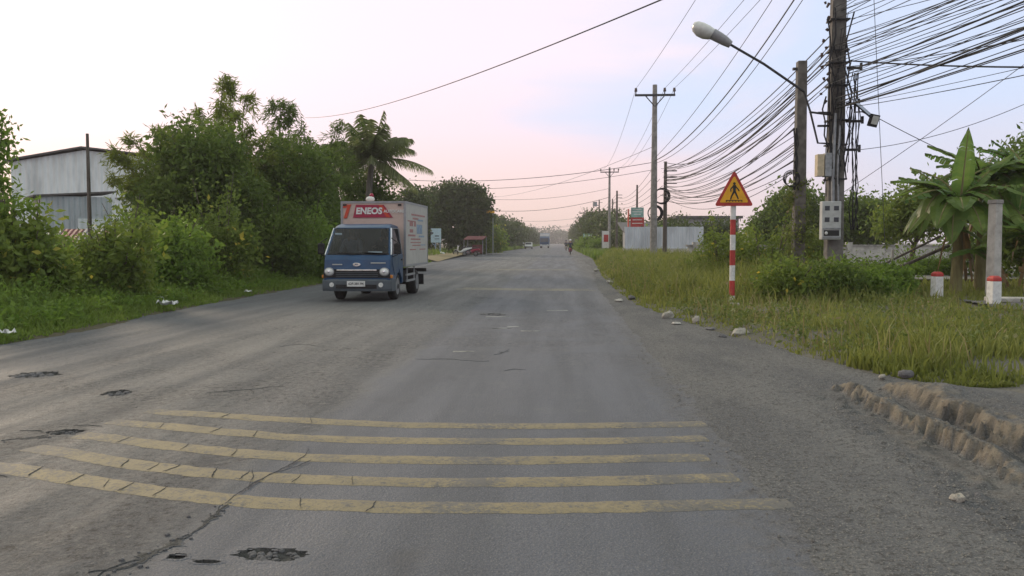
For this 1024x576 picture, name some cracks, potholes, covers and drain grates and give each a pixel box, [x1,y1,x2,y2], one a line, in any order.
pothole [33,428,96,437]
pothole [0,371,70,379]
pothole [161,552,192,562]
pothole [217,545,325,566]
pothole [92,389,139,398]
crack [1,424,100,442]
